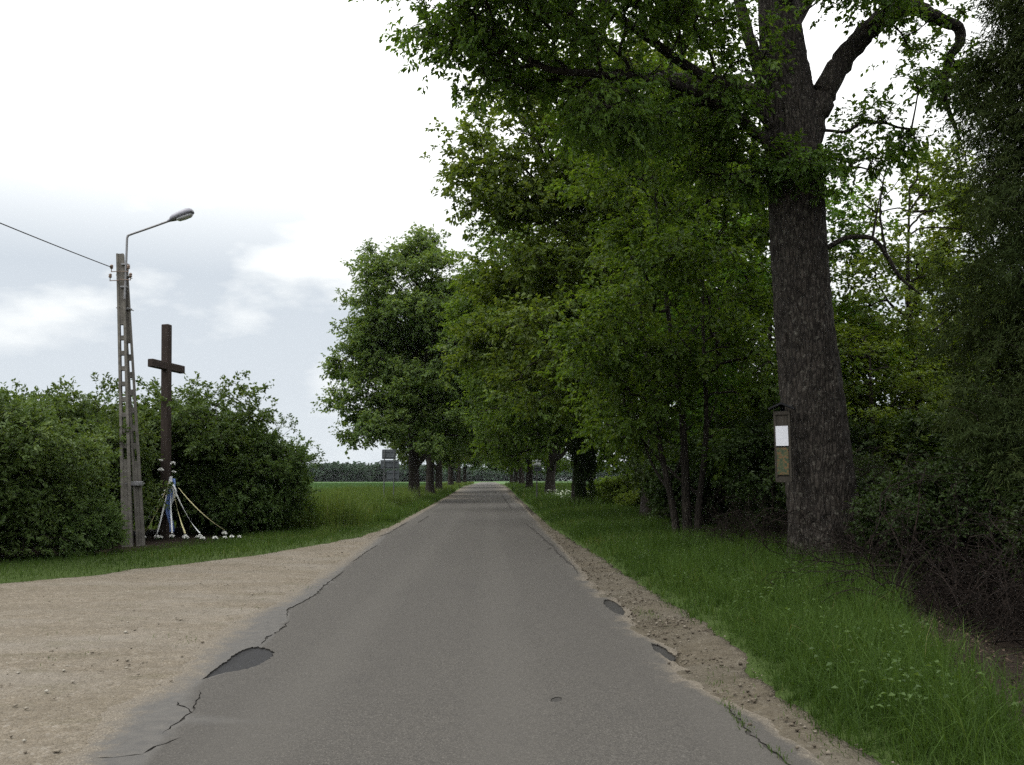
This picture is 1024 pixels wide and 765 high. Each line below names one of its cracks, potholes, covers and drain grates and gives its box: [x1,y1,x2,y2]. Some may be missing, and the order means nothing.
crack [265,516,429,641]
pothole [203,646,275,679]
pothole [652,644,676,662]
pothole [604,599,625,615]
crack [727,707,788,764]
crack [100,692,201,758]
